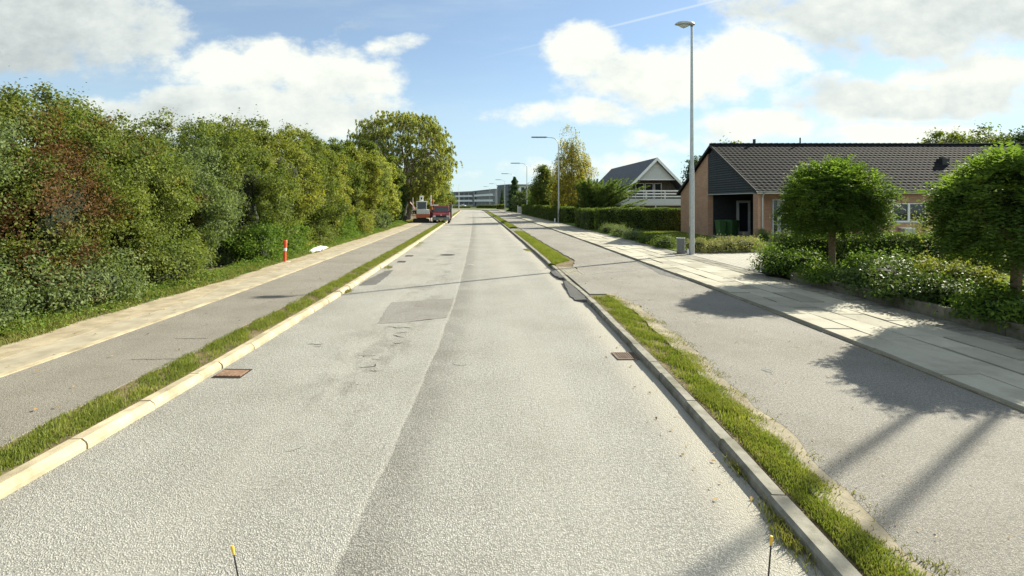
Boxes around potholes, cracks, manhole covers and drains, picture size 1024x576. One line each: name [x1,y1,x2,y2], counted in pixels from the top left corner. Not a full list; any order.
drain grate [611,352,640,360]
drain grate [211,369,252,378]
